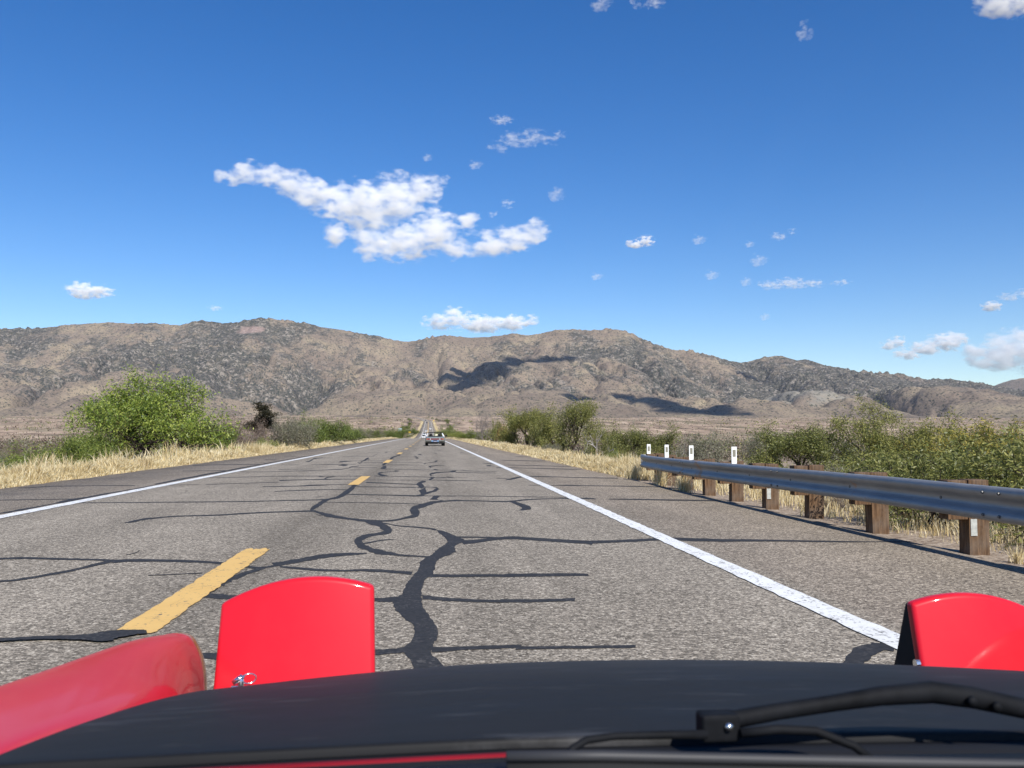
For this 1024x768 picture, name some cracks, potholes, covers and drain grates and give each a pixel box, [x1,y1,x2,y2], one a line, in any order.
crack [188,452,721,501]
